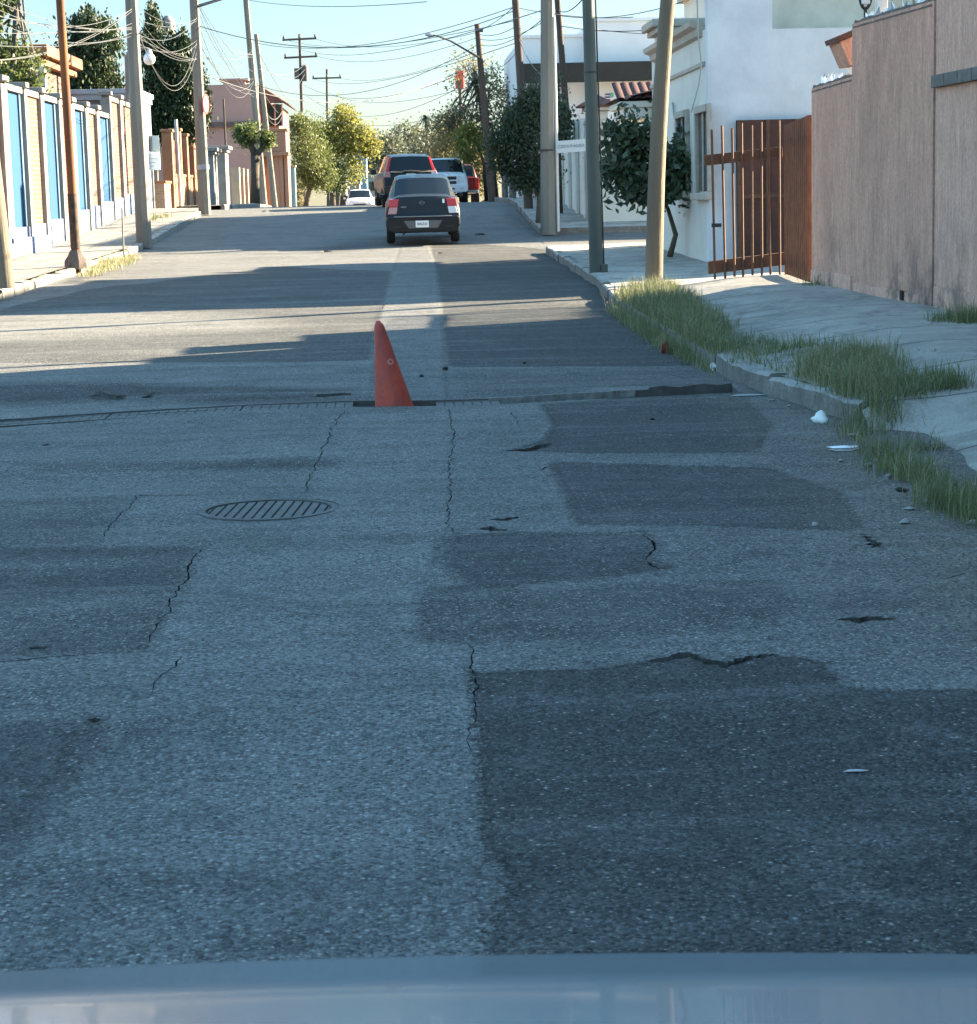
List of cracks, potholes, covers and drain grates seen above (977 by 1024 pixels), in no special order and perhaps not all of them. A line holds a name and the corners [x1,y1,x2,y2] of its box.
crack [100,493,265,541]
crack [643,532,669,569]
crack [0,547,202,662]
crack [305,411,345,491]
crack [445,409,475,533]
manhole cover [198,498,339,521]
